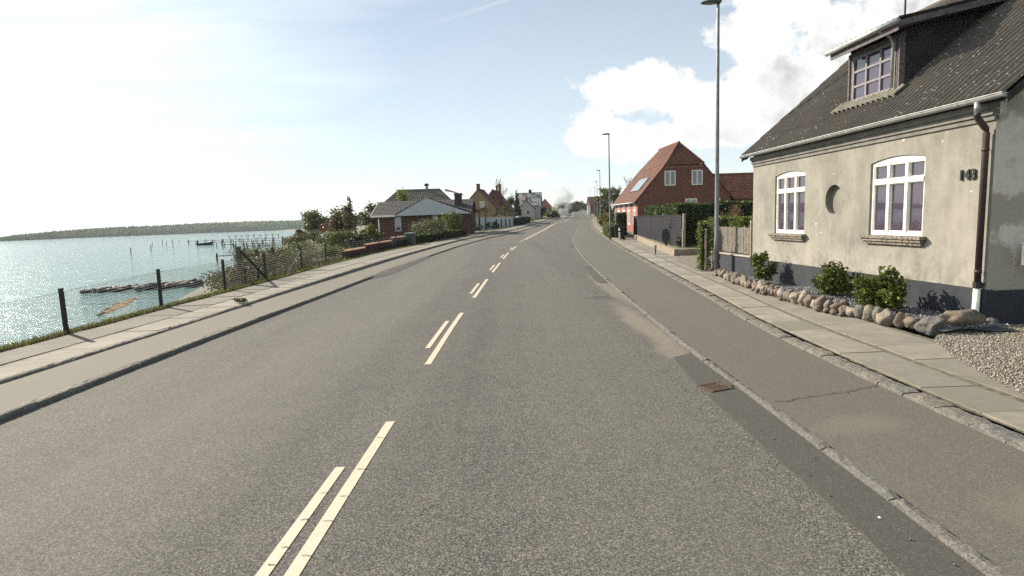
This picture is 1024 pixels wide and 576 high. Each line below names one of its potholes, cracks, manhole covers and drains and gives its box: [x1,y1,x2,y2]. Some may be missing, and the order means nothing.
drain grate [696,382,735,393]
